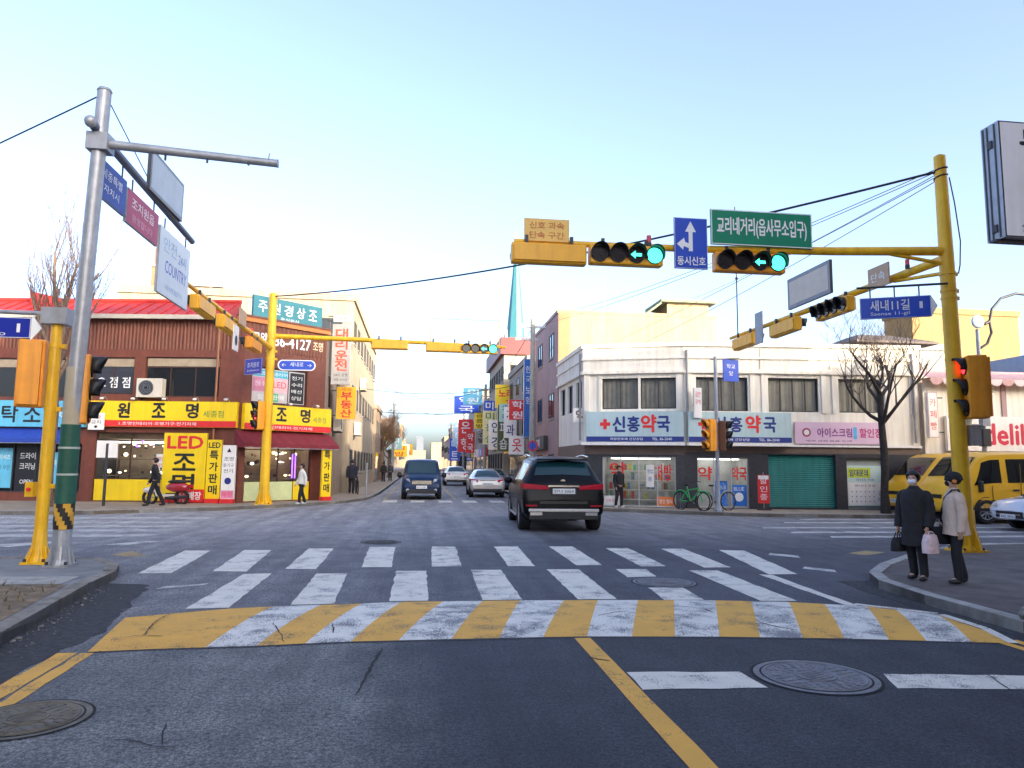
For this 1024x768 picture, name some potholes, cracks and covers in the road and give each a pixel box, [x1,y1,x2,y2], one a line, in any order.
manhole cover [0,699,96,741]
manhole cover [750,659,885,696]
manhole cover [631,577,698,588]
crack [115,723,167,747]
crack [355,647,382,695]
